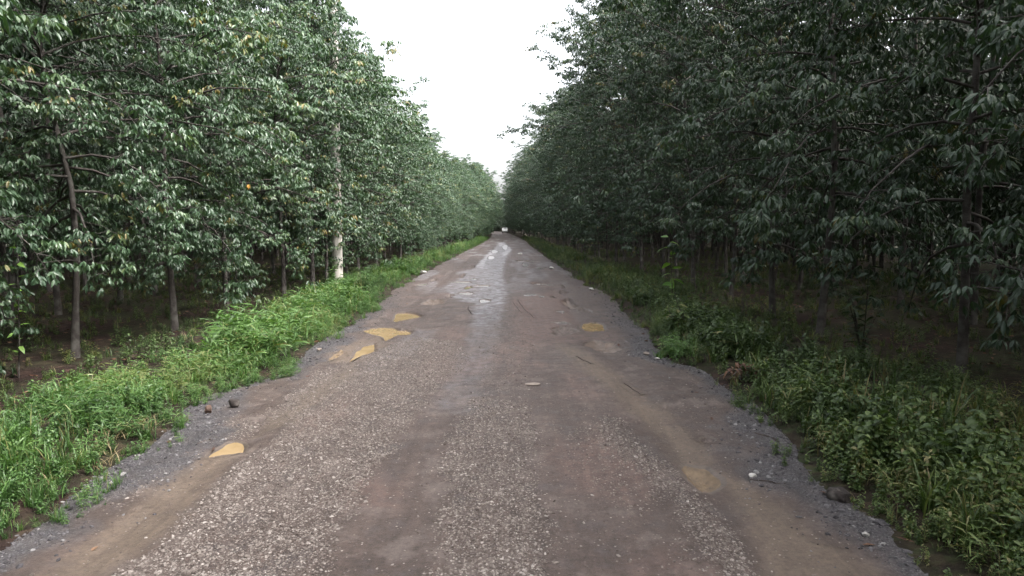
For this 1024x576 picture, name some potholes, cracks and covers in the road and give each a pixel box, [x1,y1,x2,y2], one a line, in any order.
crack [617,382,648,395]
crack [570,355,595,365]
crack [509,298,537,318]
